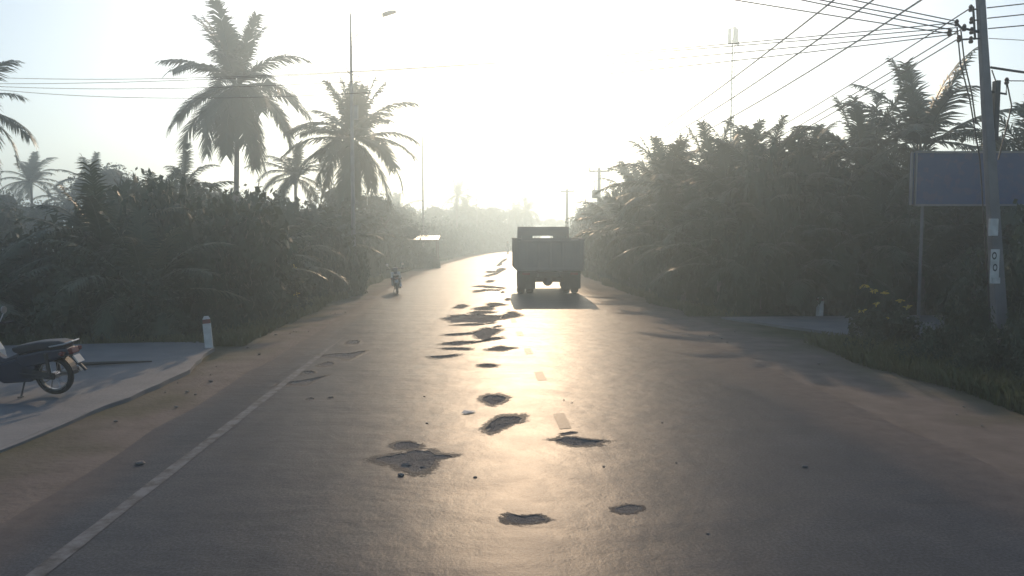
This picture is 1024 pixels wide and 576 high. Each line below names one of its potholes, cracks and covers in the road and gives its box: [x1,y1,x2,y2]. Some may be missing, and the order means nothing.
pothole [483,395,506,404]
pothole [555,437,603,445]
pothole [507,514,545,523]
pothole [615,505,643,513]
pothole [375,450,452,472]
pothole [287,376,325,385]
pothole [324,351,365,359]
pothole [485,416,522,432]
pothole [442,314,504,323]
pothole [471,328,501,340]
